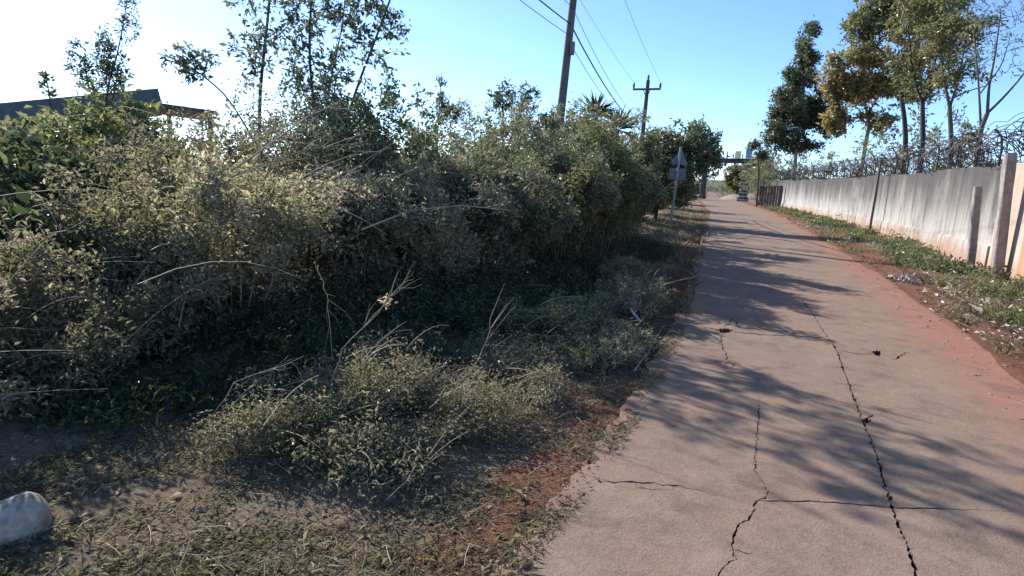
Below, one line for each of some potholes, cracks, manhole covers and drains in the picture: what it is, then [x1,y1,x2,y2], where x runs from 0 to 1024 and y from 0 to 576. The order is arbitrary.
crack [582,294,1014,576]
